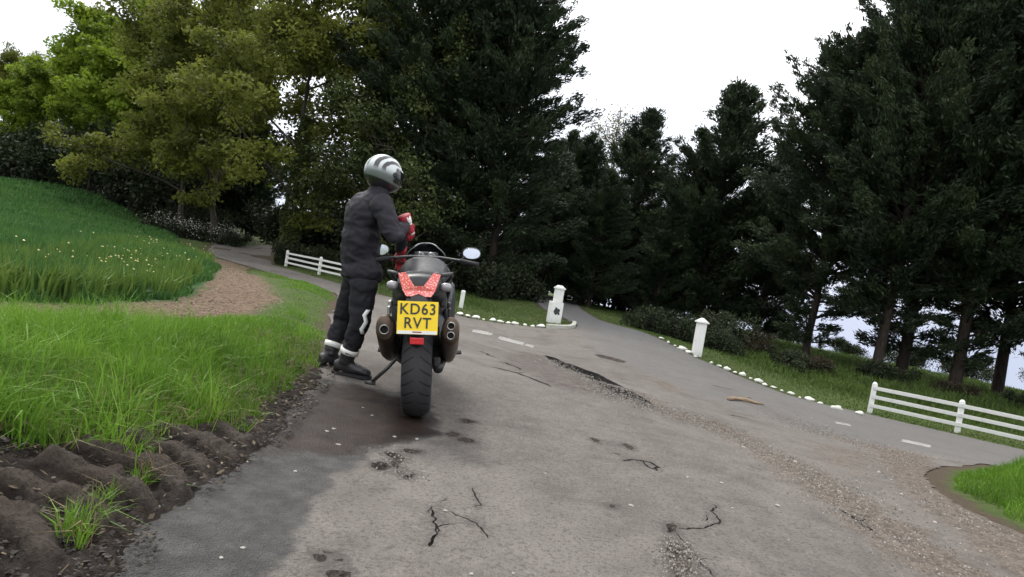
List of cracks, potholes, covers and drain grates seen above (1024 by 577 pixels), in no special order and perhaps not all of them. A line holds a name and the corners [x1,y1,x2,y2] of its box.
pothole [371,462,391,470]
crack [480,351,551,387]
crack [677,505,722,577]
pothole [384,452,405,464]
pothole [545,355,656,407]
crack [428,488,488,547]
crack [615,453,660,471]
